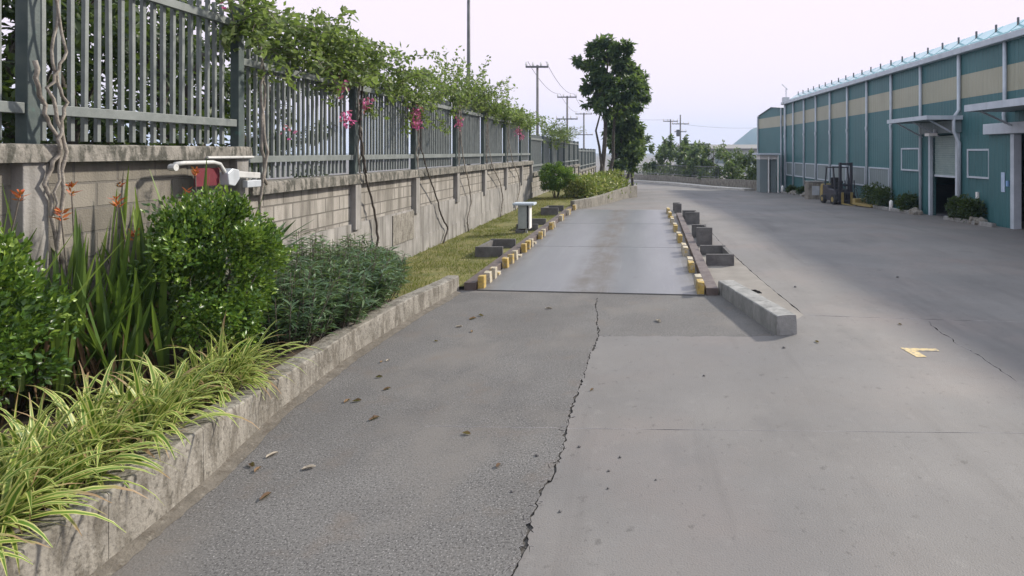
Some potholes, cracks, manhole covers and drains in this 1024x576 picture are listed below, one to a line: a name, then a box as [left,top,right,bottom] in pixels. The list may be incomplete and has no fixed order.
crack [503,298,604,576]
crack [931,325,1016,381]
